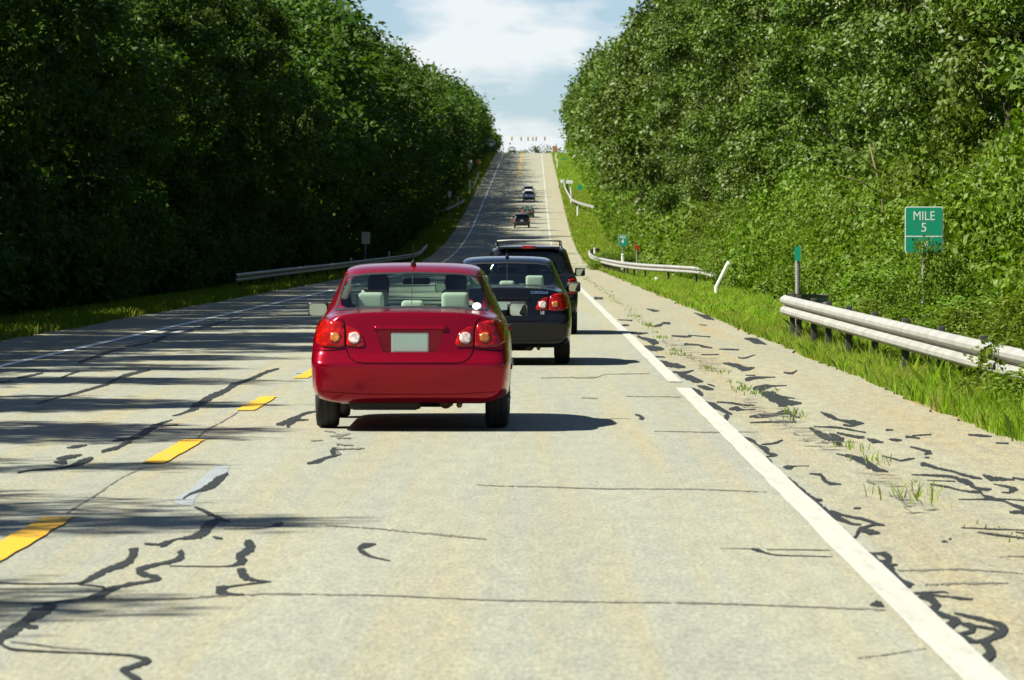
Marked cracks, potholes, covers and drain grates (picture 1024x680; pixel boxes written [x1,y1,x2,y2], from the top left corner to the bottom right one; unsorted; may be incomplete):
crack [0,592,885,610]
crack [311,430,364,455]
crack [857,648,926,658]
crack [475,484,765,492]
crack [742,398,856,450]
crack [898,555,1024,586]
